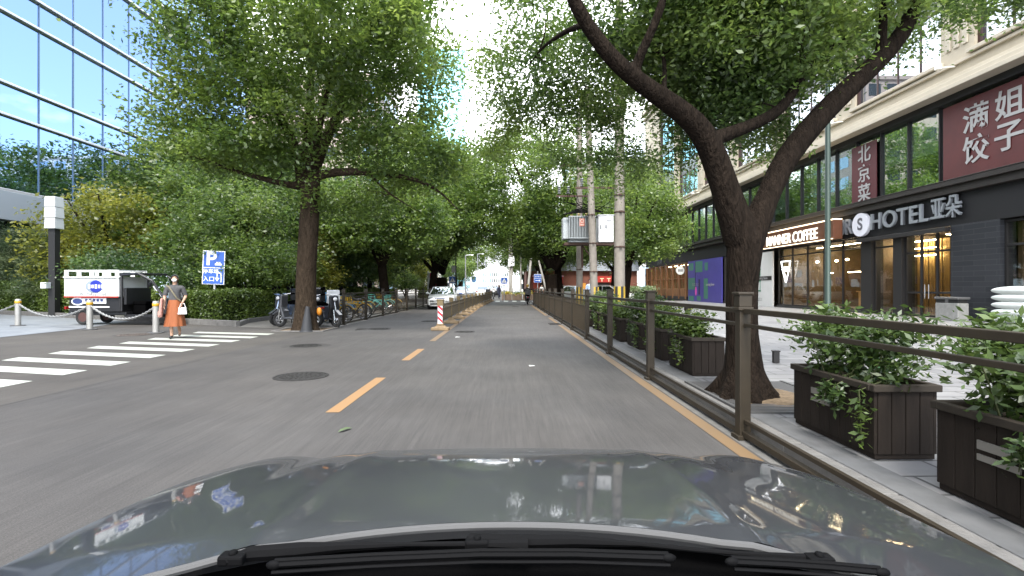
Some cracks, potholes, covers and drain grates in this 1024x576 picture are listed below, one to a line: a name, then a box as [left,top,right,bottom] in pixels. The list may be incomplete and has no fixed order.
manhole cover [272,372,329,381]
